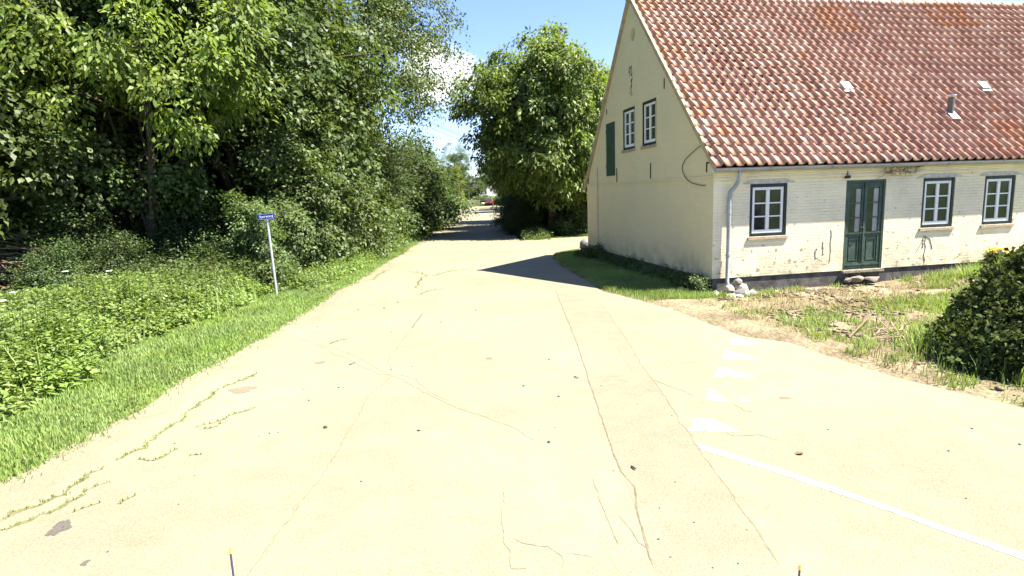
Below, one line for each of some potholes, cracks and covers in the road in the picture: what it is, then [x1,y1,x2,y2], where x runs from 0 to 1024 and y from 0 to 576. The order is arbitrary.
crack [501,483,591,569]
crack [249,248,473,574]
crack [595,301,778,563]
crack [1,372,257,531]
